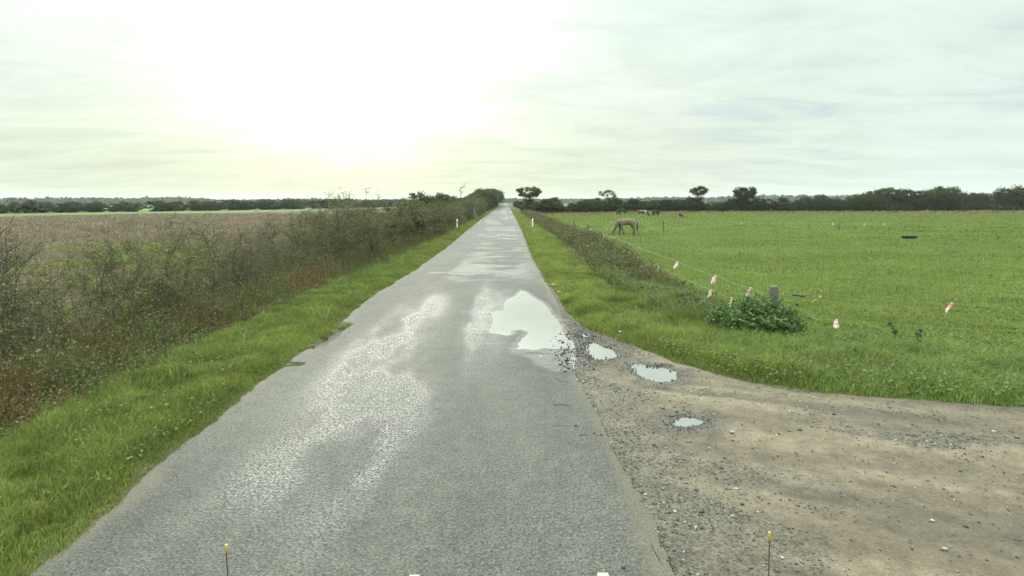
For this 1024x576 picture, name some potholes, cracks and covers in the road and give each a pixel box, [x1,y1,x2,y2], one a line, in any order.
pothole [670,416,706,427]
pothole [584,342,618,360]
pothole [630,363,678,382]
